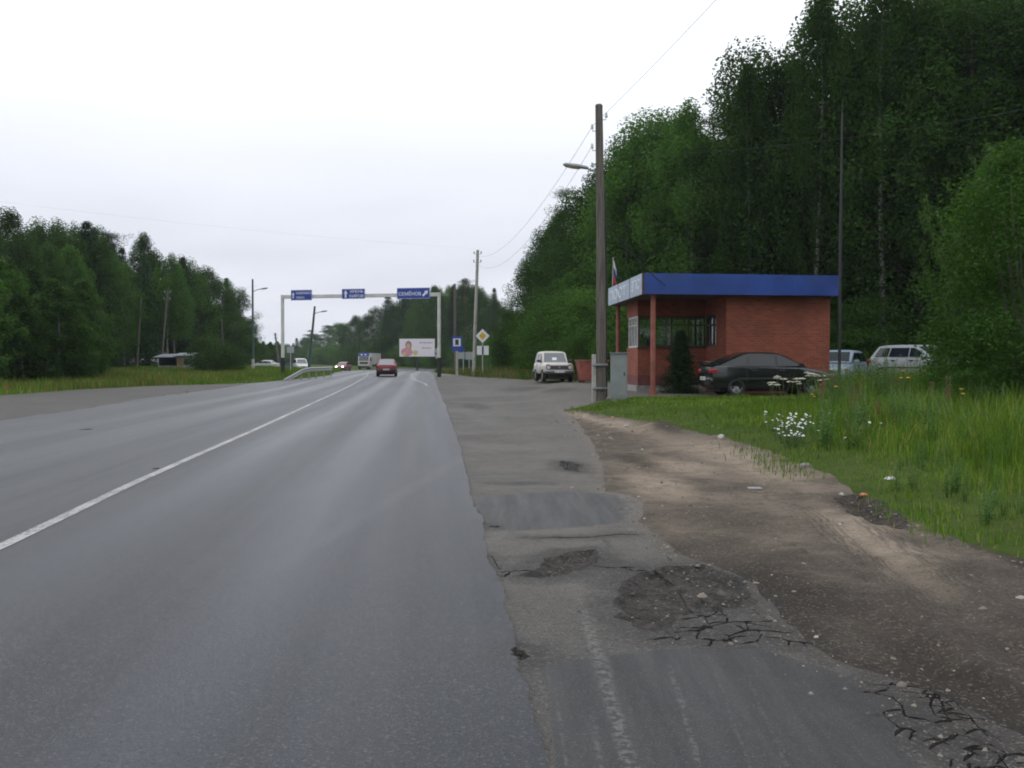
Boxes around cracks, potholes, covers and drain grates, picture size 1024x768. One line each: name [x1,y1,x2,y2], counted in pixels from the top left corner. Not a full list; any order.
pothole [612,564,758,634]
crack [654,611,812,647]
pothole [516,549,602,578]
crack [864,682,1024,768]
pothole [511,647,530,660]
pothole [559,461,582,472]
